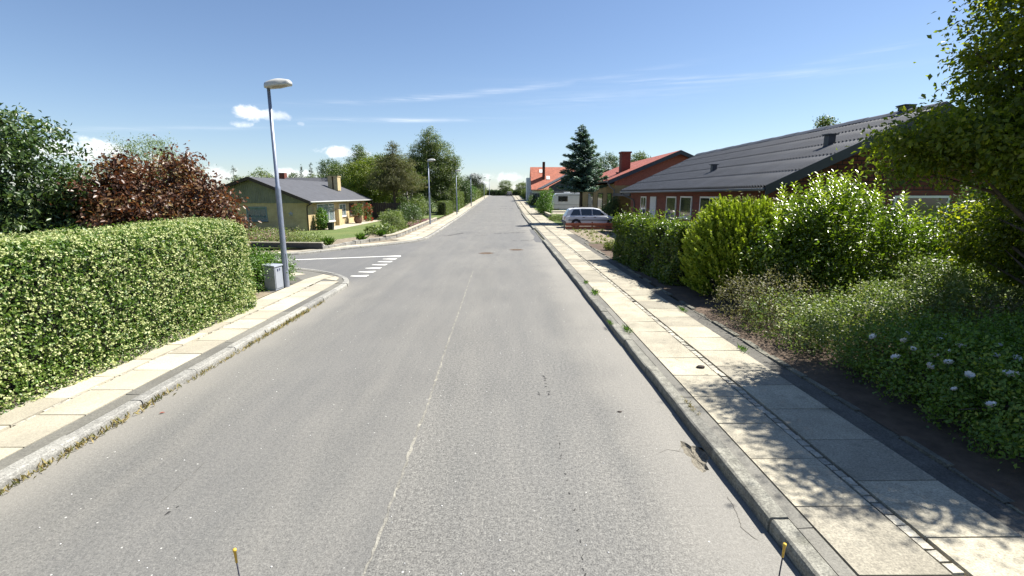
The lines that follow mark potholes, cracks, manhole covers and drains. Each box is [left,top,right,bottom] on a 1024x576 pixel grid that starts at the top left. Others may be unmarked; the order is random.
pothole [680,441,709,473]
